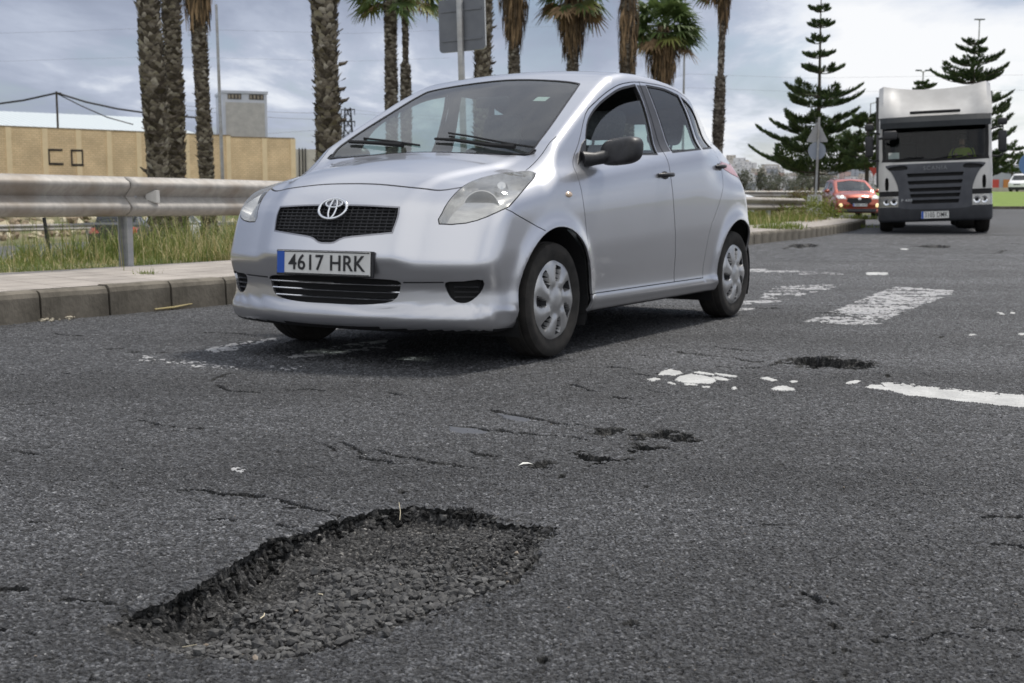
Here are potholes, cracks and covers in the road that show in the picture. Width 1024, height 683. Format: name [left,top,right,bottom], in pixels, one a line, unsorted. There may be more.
pothole [584,427,630,437]
crack [802,591,839,606]
pothole [626,429,703,443]
pothole [566,450,635,467]
crack [323,442,501,469]
pothole [97,502,559,664]
crack [447,409,589,440]
pothole [626,442,672,454]
crack [177,488,331,528]
pothole [779,355,879,370]
crack [881,626,1024,642]
